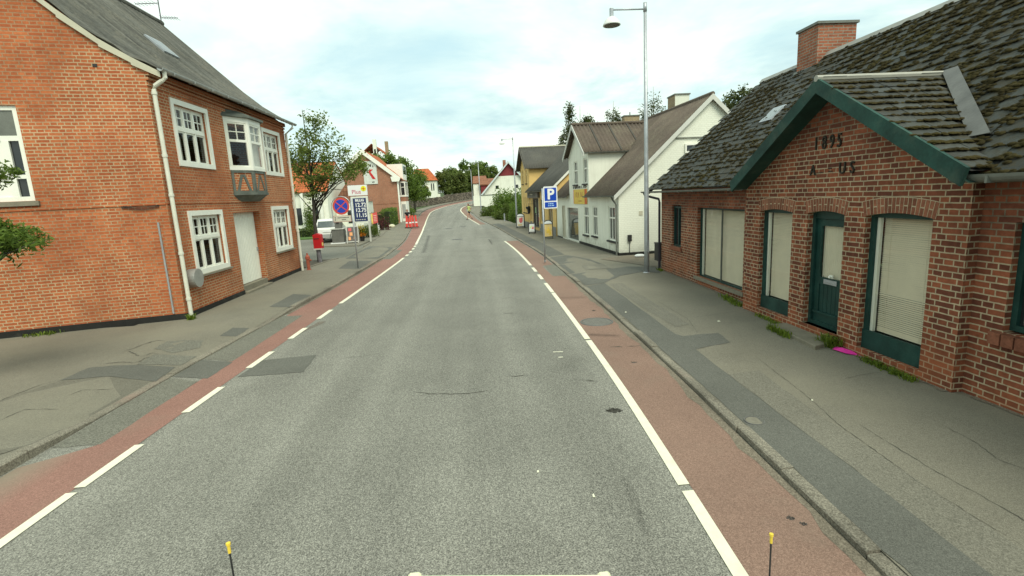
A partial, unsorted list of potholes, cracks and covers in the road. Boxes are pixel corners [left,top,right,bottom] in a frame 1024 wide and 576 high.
manhole cover [580,318,613,326]
manhole cover [744,416,765,425]
